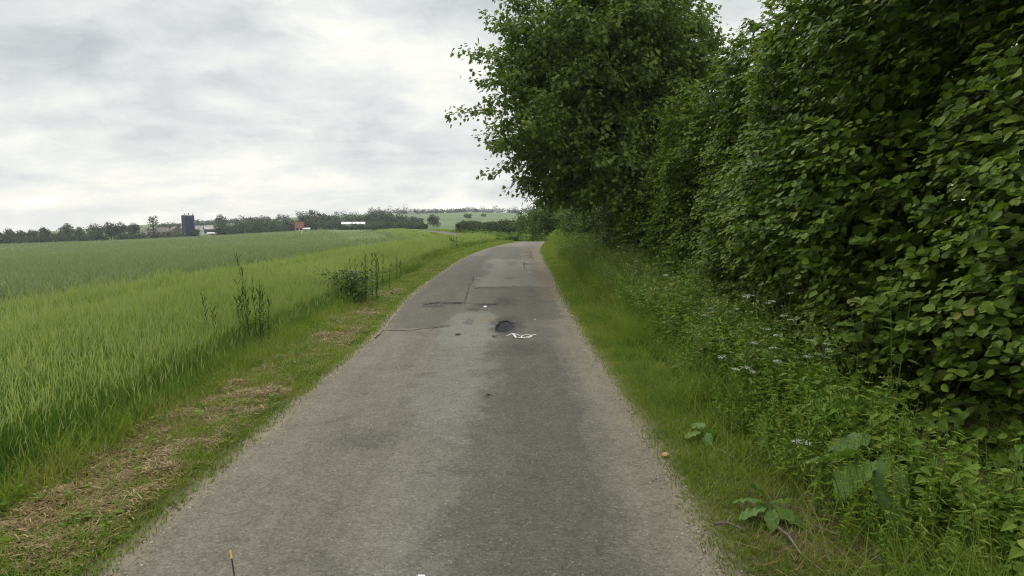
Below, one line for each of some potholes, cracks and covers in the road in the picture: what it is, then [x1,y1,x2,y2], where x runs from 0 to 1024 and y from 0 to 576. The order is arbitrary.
pothole [495,320,515,332]
crack [424,251,533,305]
